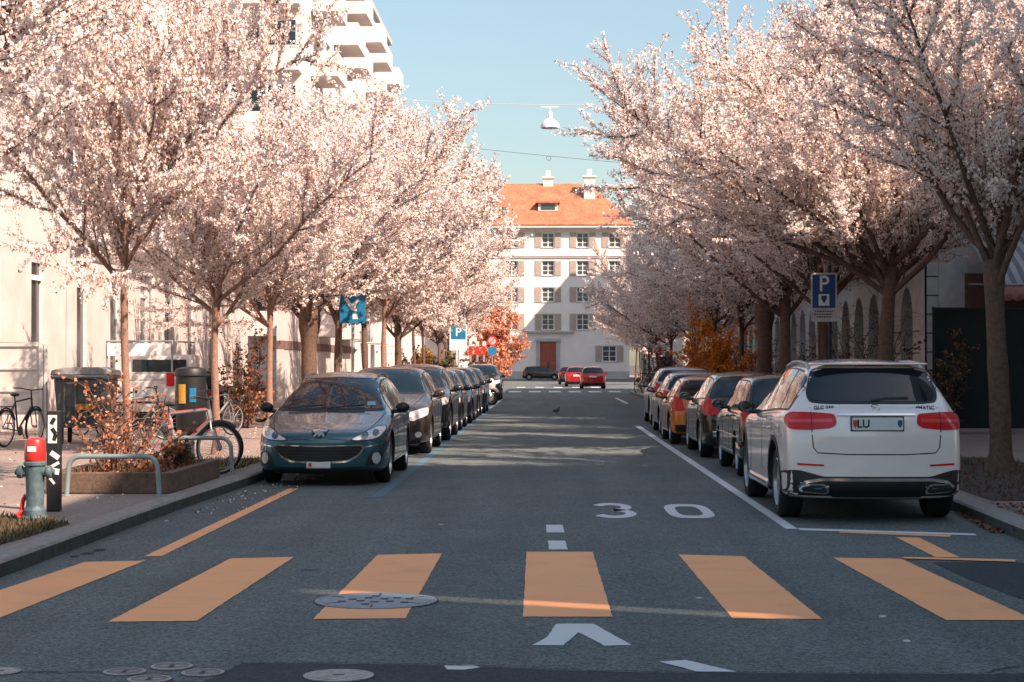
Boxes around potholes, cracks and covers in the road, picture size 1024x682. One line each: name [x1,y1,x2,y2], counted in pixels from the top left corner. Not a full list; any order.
manhole cover [102,667,147,676]
manhole cover [0,667,22,675]
manhole cover [302,669,375,682]
manhole cover [181,668,225,677]
manhole cover [313,592,439,609]
manhole cover [150,662,194,670]
